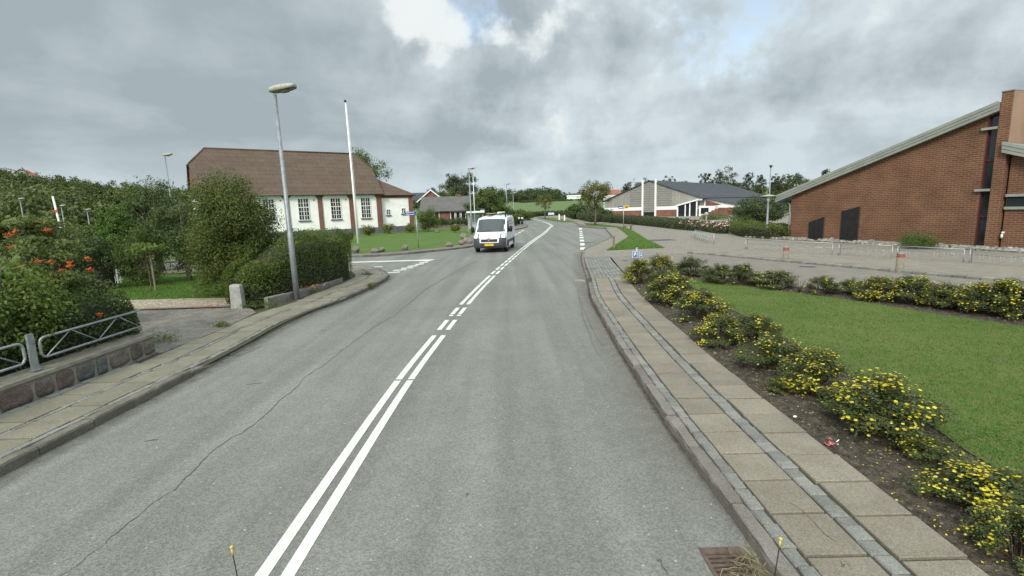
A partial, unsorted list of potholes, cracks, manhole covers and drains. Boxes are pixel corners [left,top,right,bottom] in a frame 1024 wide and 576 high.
drain grate [699,542,773,576]
crack [59,306,405,576]
